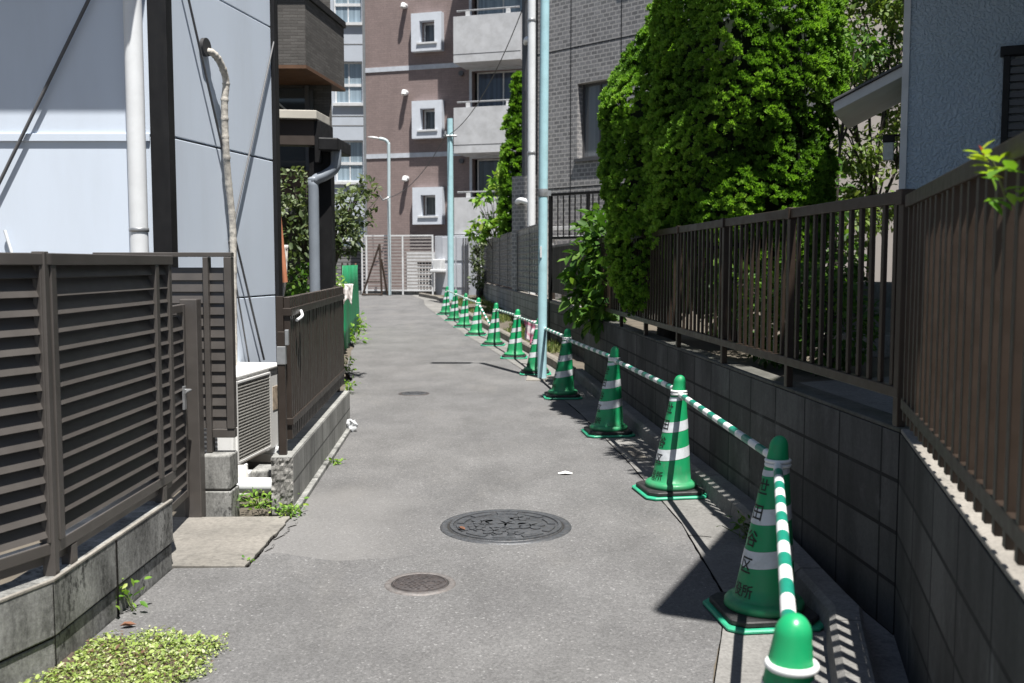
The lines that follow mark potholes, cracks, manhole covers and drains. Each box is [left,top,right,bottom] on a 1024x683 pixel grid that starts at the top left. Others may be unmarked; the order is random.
manhole cover [384,572,456,596]
crack [246,516,296,567]
manhole cover [440,509,572,545]
